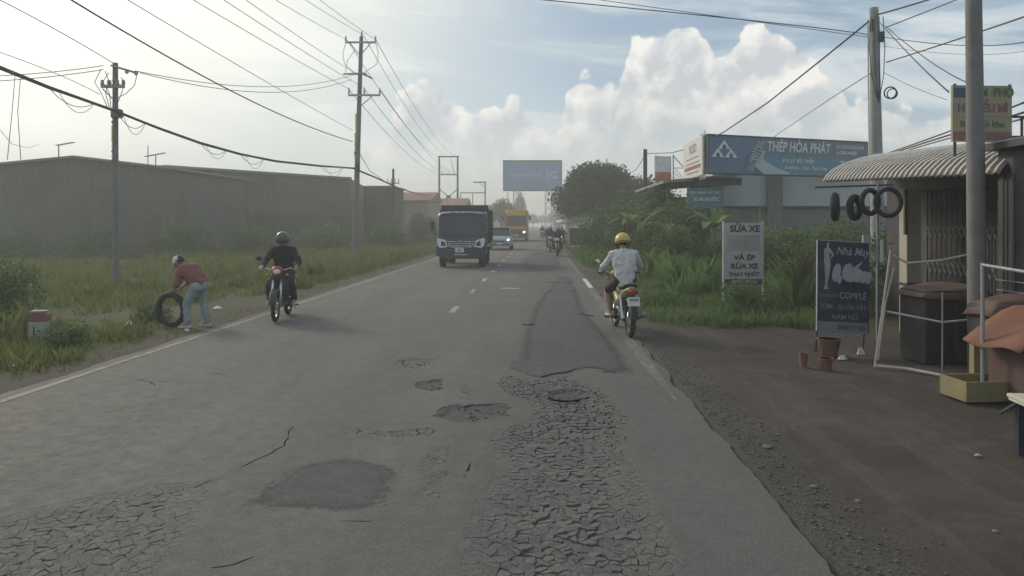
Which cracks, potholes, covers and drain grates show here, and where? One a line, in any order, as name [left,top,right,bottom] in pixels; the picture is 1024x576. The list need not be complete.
pothole [390,357,444,369]
pothole [432,403,514,423]
crack [0,371,688,576]
pothole [415,379,459,391]
